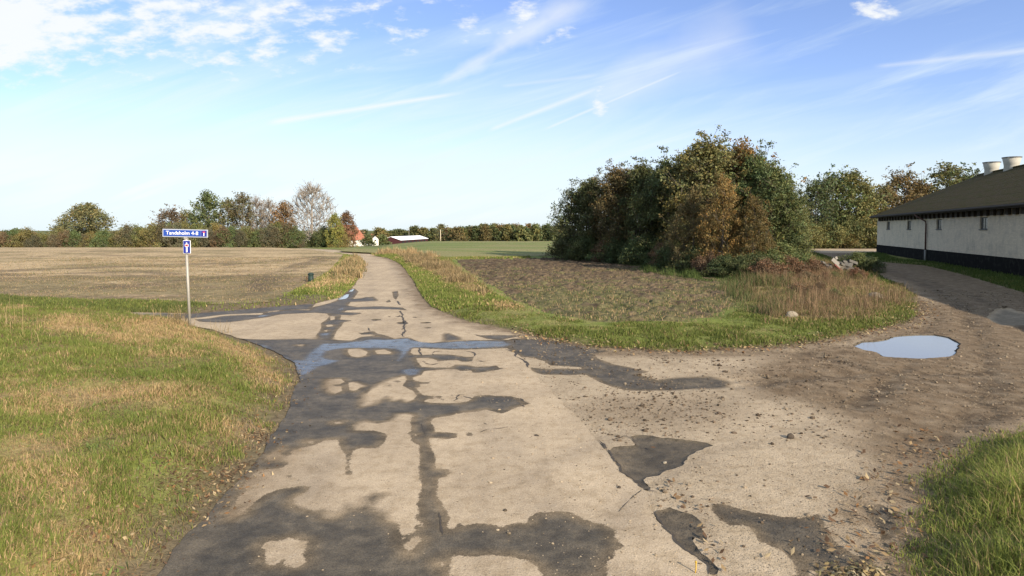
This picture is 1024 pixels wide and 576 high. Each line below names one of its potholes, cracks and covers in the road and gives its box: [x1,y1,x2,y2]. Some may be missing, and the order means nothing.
crack [397,301,442,355]
pothole [853,334,961,358]
